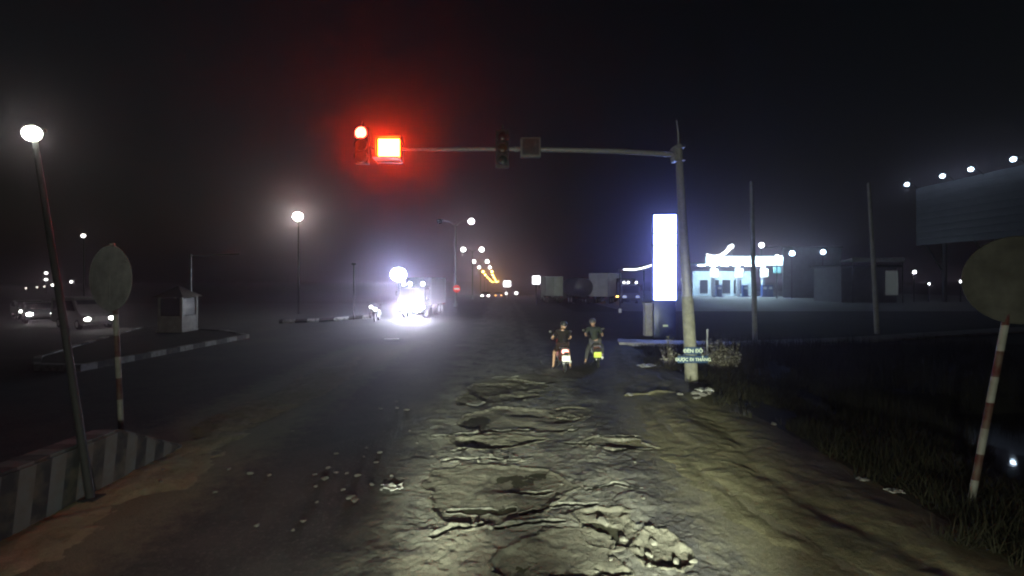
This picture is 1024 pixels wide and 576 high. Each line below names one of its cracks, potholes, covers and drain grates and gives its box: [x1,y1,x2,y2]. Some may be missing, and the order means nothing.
pothole [628,525,695,573]
crack [426,480,647,540]
crack [430,429,536,463]
pothole [456,406,586,435]
pothole [568,505,642,553]
pothole [577,435,666,451]
pothole [455,394,482,406]
pothole [444,434,550,451]
pothole [461,378,548,404]
pothole [549,406,593,421]
pothole [420,463,582,530]
